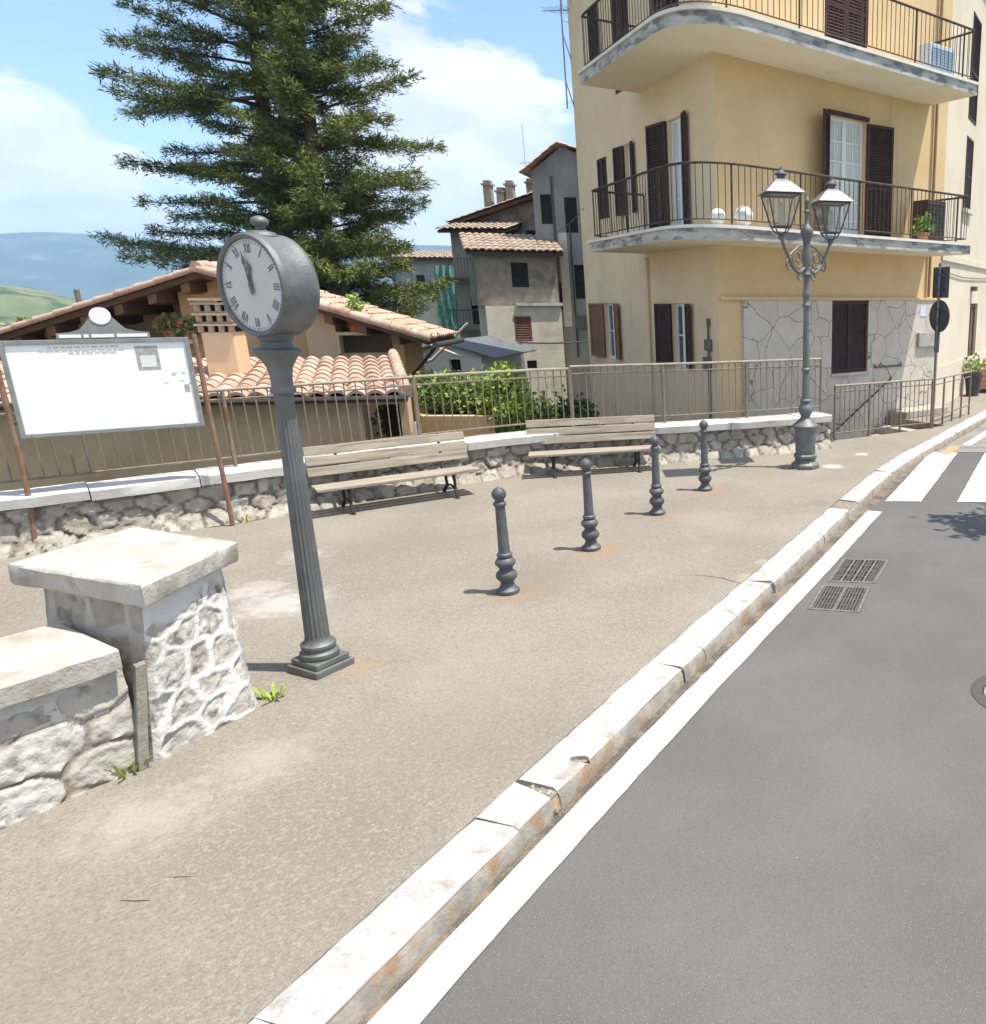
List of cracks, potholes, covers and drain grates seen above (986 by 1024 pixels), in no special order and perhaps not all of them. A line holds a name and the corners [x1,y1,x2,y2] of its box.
manhole cover [971,675,986,708]
drain grate [827,558,890,583]
drain grate [808,585,870,613]
